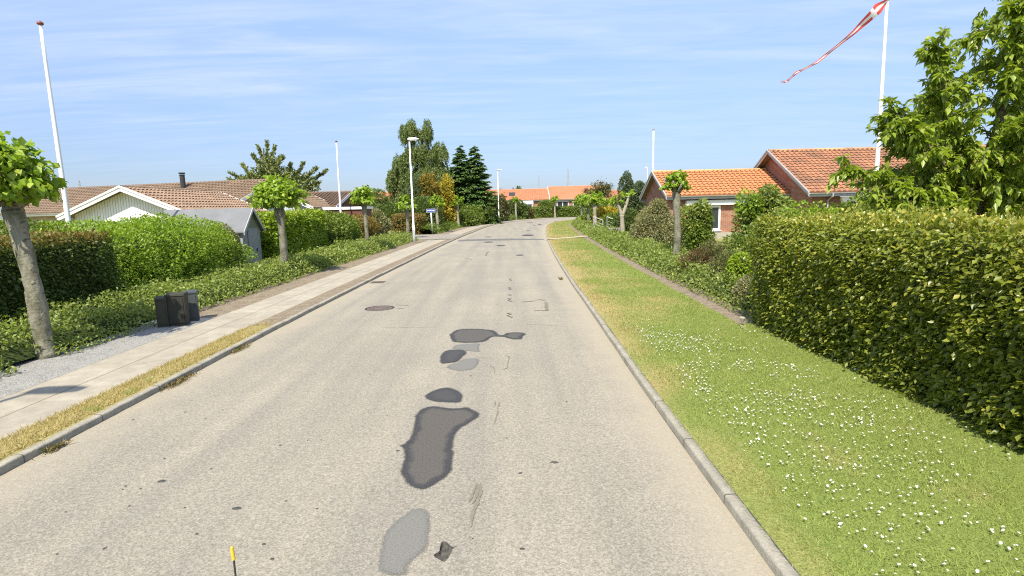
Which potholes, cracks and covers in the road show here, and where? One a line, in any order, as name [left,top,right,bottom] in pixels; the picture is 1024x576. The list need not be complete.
pothole [434,541,456,562]
crack [506,280,548,317]
crack [469,483,483,527]
